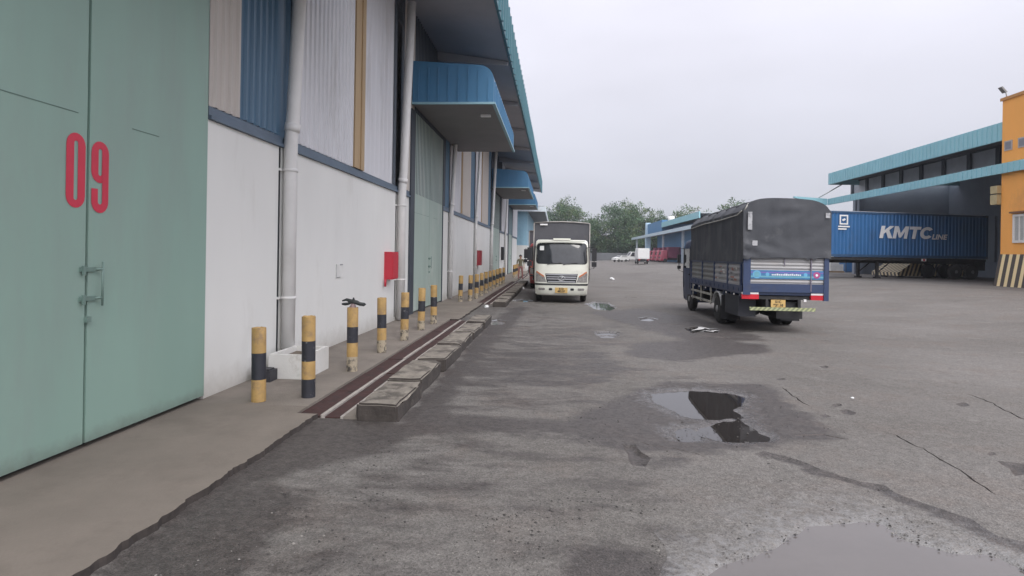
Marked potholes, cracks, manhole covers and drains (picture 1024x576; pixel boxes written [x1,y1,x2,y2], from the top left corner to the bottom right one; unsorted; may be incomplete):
pothole [622,444,651,467]
crack [888,433,993,493]
pothole [625,384,780,446]
